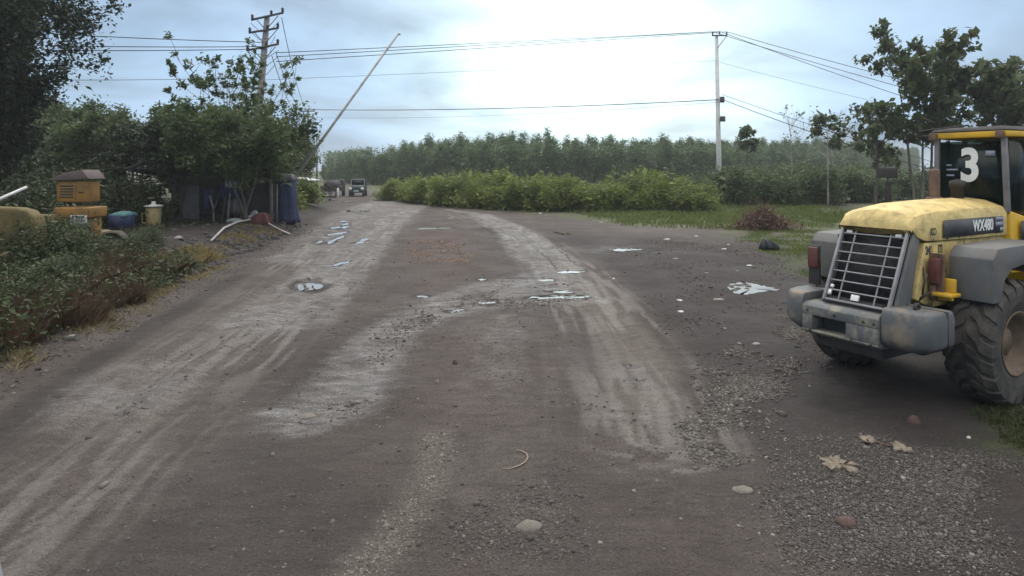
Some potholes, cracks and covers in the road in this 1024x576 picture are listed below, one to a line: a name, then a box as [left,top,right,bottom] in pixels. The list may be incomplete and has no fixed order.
pothole [295,282,326,292]
